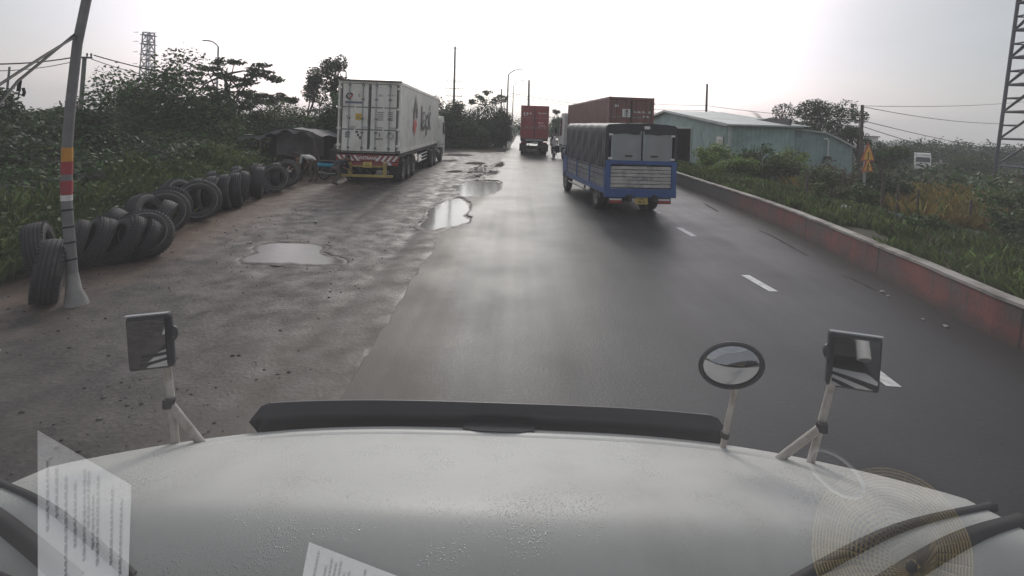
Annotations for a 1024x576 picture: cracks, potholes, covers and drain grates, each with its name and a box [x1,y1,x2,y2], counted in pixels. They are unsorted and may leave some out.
pothole [239,242,347,267]
pothole [413,198,471,231]
pothole [450,181,502,197]
